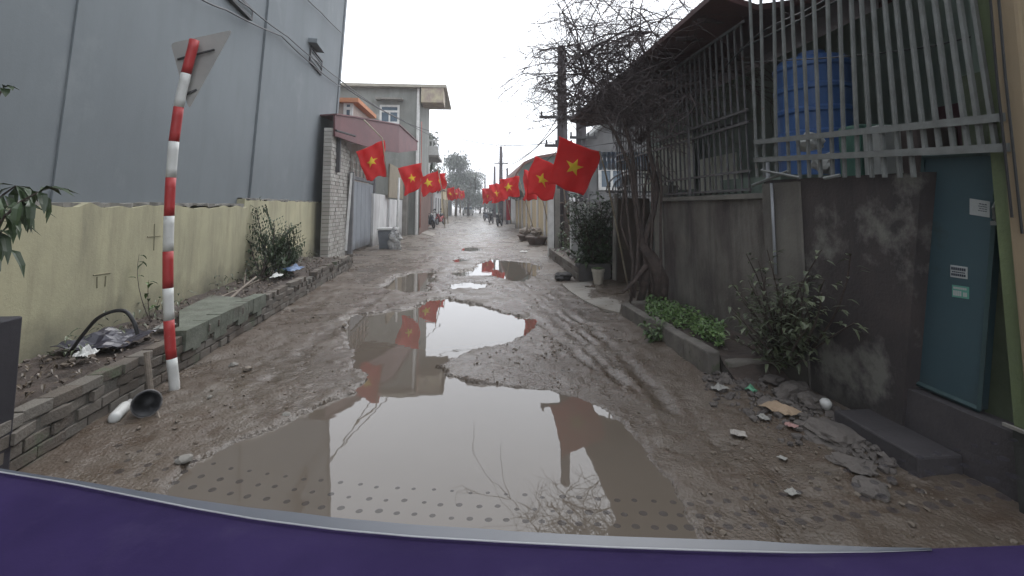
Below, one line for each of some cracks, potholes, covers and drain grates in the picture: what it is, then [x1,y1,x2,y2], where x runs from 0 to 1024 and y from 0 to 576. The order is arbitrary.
pothole [160,296,707,539]
pothole [440,258,542,281]
pothole [376,271,439,290]
